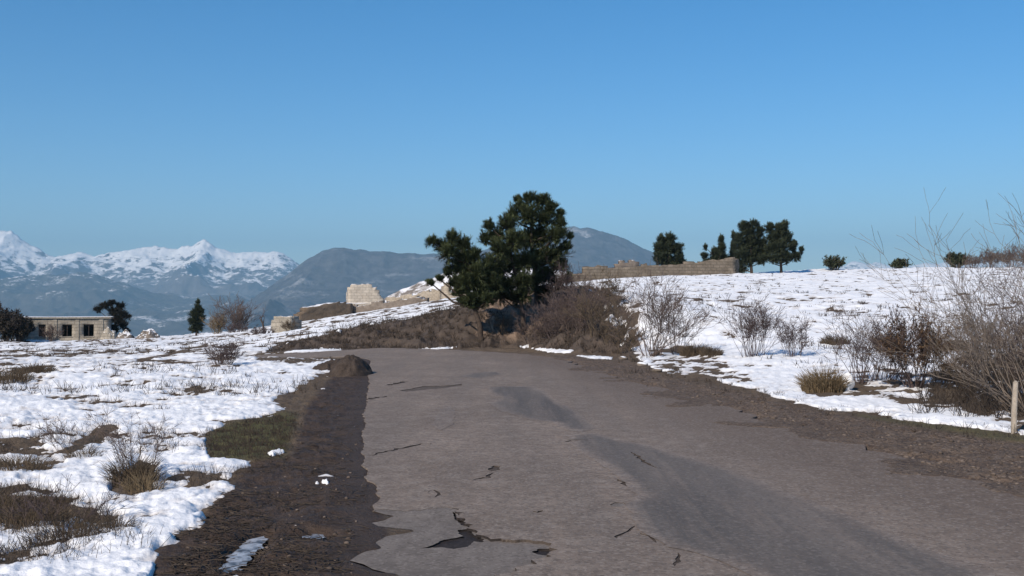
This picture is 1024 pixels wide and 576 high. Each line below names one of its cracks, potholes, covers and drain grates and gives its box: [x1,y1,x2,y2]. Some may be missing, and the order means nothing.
crack [614,526,681,566]
crack [617,452,656,486]
crack [368,443,431,456]
